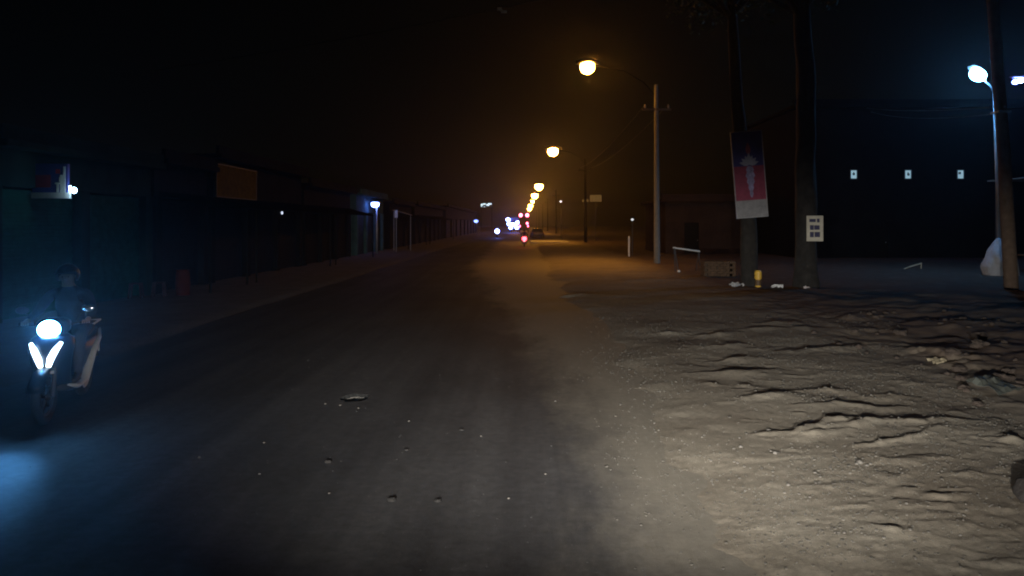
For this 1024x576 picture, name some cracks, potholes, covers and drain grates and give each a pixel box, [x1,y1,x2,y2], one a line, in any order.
pothole [340,394,369,402]
